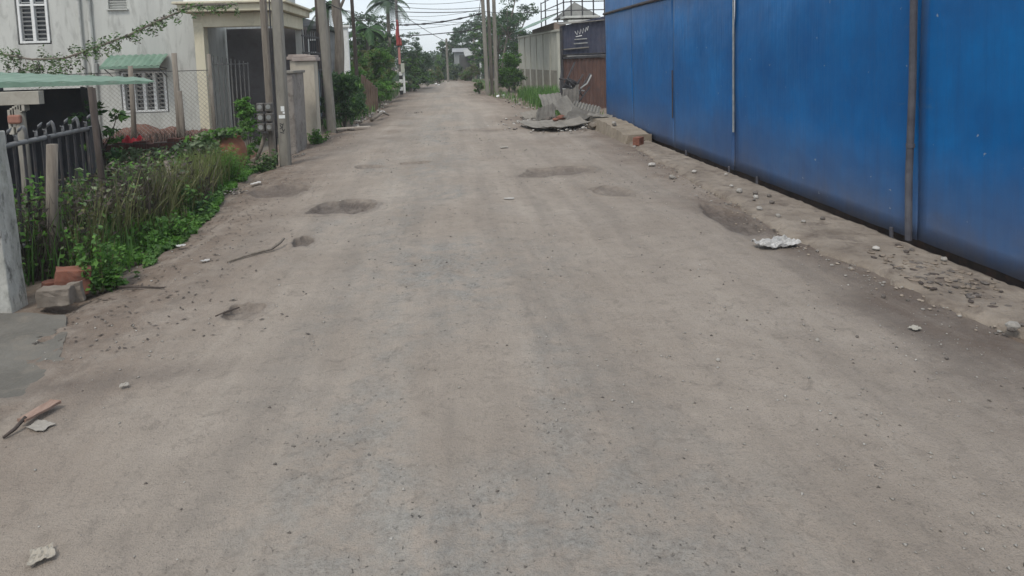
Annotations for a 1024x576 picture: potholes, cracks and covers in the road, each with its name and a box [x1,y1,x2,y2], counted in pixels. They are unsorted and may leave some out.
pothole [512,165,603,179]
pothole [583,185,640,199]
pothole [692,200,778,242]
